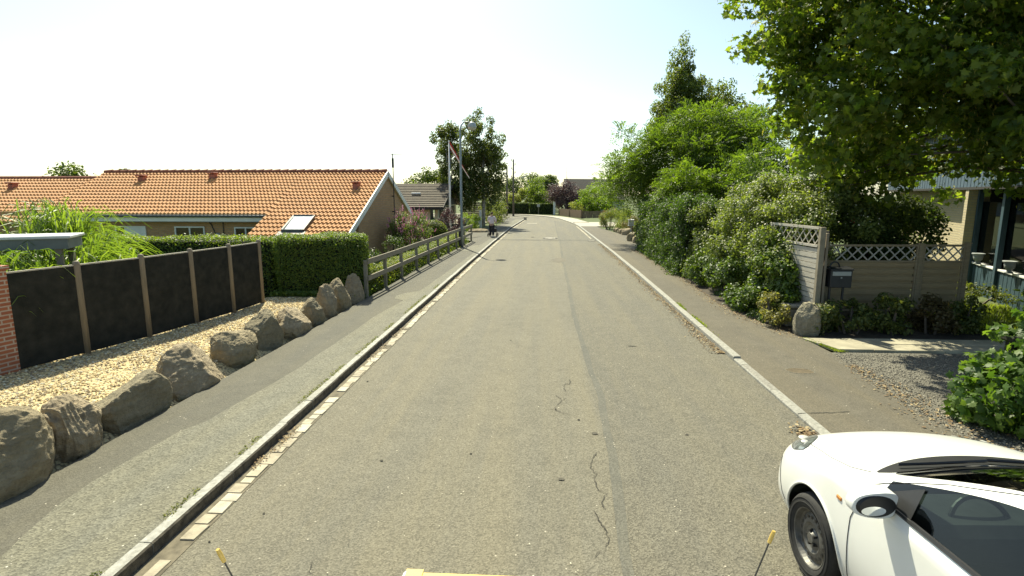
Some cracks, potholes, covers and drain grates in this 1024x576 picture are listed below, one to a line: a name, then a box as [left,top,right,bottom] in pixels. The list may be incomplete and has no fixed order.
crack [577,453,616,556]
